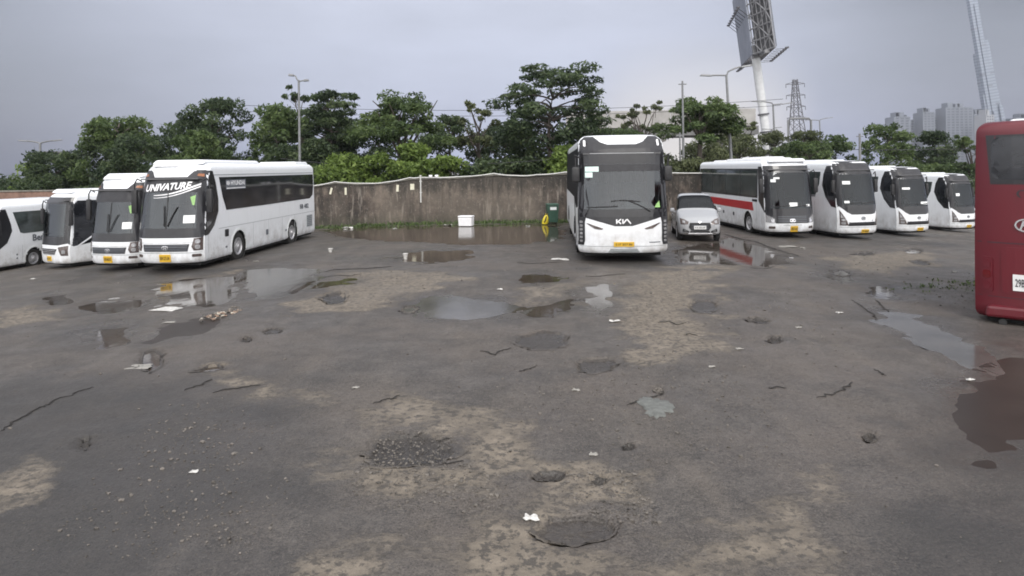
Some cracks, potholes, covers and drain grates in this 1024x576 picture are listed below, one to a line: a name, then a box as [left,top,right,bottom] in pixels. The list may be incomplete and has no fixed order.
pothole [862,431,879,443]
pothole [765,335,783,344]
crack [185,379,261,393]
pothole [138,346,167,374]
pothole [529,512,620,547]
pothole [531,469,568,482]
crack [0,387,92,431]
pothole [359,429,469,469]
crack [816,382,852,398]
pothole [742,316,770,324]
